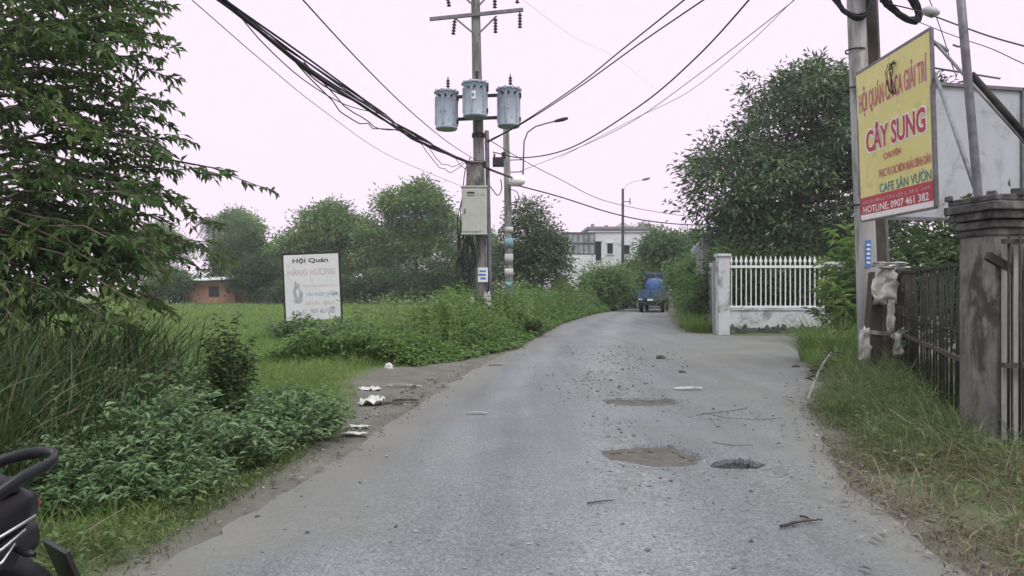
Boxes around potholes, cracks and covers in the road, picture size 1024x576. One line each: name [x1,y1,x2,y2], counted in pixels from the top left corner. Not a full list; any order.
pothole [588,441,716,470]
pothole [595,396,688,407]
crack [699,408,780,420]
pothole [697,455,778,471]
